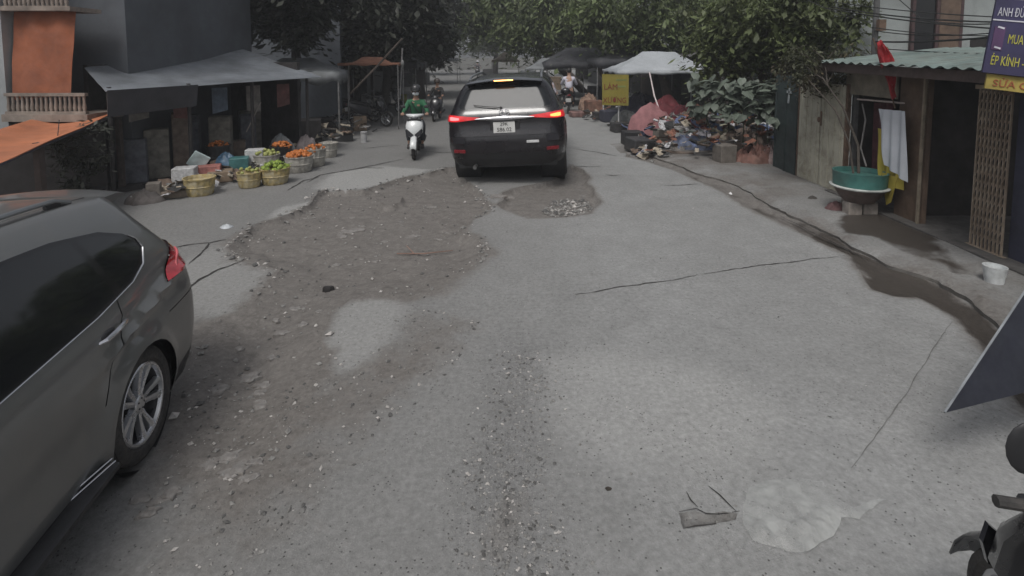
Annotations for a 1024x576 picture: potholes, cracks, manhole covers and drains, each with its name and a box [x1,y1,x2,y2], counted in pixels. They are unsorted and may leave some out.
pothole [180,167,490,472]
crack [288,145,401,190]
crack [679,486,738,529]
crack [178,239,239,286]
pothole [497,165,601,218]
crack [852,322,952,467]
